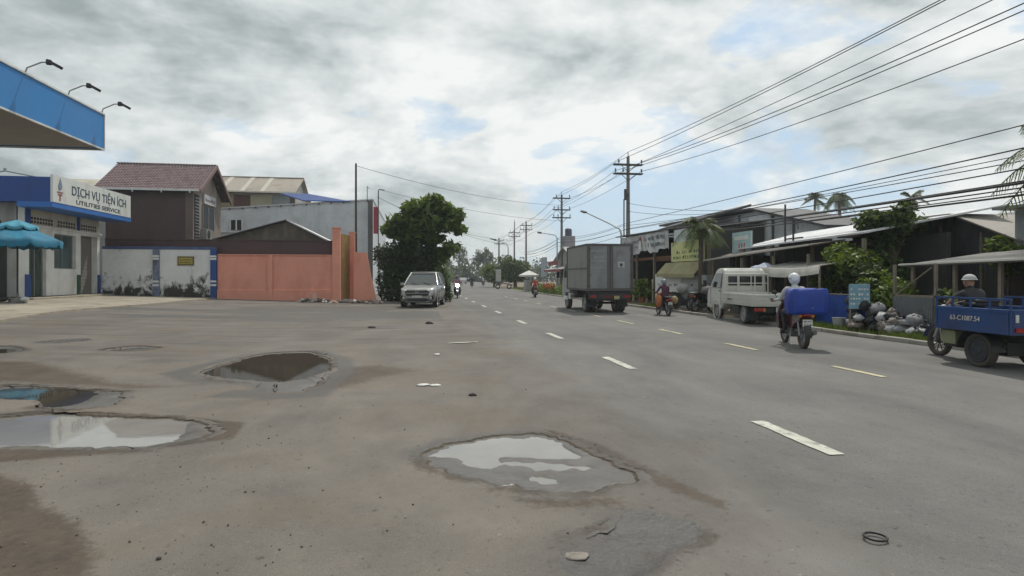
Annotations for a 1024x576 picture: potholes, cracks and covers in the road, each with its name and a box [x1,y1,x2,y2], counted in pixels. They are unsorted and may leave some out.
pothole [192,351,338,393]
pothole [408,430,653,498]
pothole [0,385,138,413]
pothole [0,345,37,354]
pothole [0,412,226,450]
